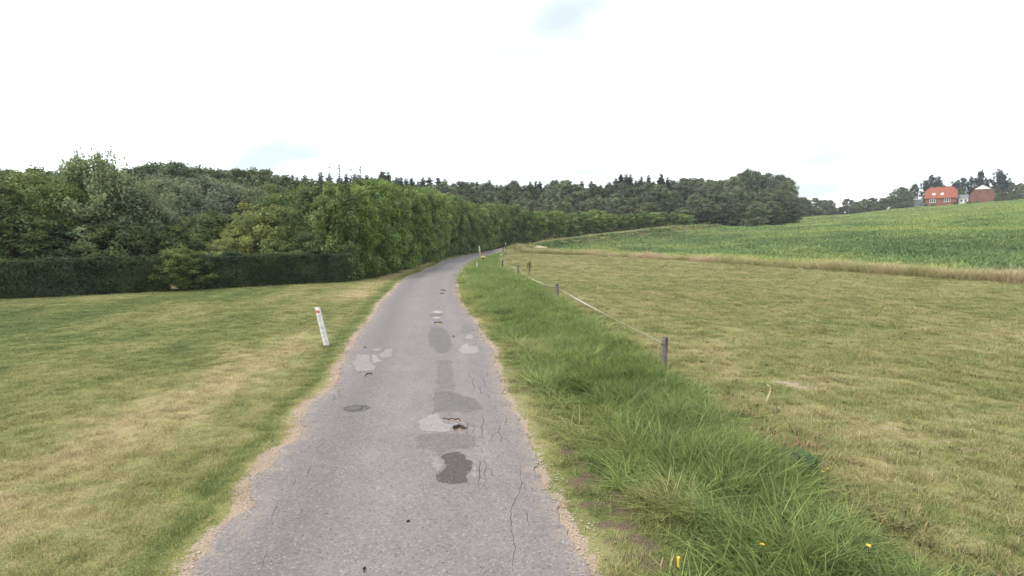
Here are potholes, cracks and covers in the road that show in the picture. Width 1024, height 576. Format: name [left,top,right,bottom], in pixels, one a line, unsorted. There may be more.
crack [496,472,536,572]
crack [466,413,510,490]
